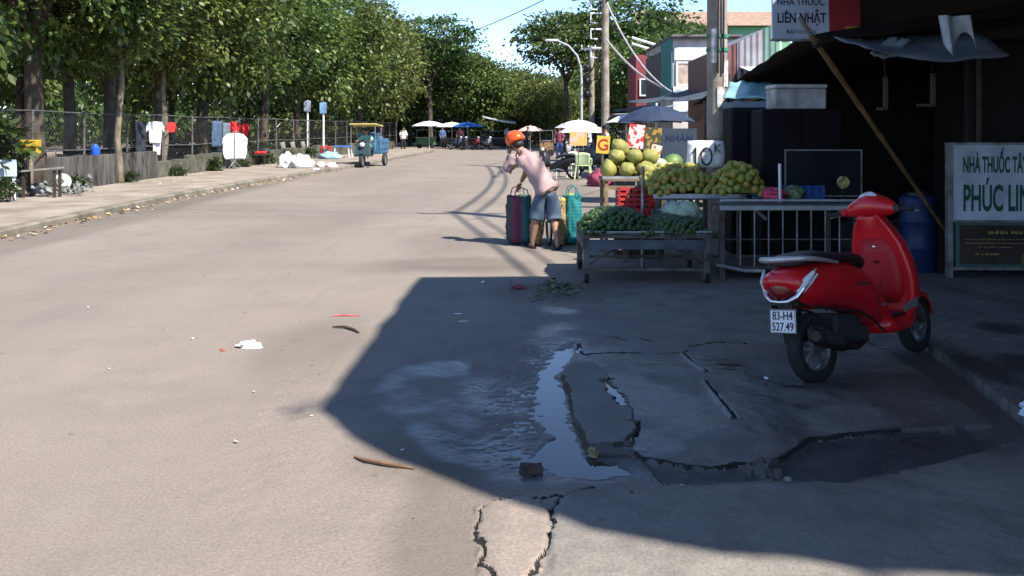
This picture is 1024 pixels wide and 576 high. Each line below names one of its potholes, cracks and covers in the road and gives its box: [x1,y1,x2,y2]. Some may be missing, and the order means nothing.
crack [473,486,596,576]
pothole [520,339,659,485]
pothole [774,425,992,483]
pothole [644,458,762,485]
crack [580,336,756,419]
